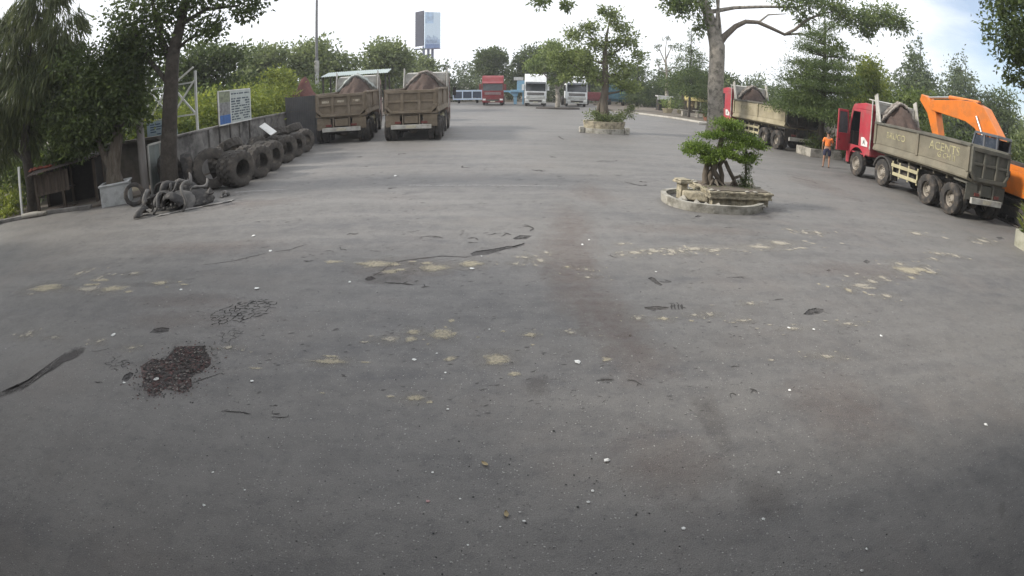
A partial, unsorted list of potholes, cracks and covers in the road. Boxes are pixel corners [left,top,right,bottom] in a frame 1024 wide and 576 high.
pothole [120,339,228,409]
crack [375,224,534,287]
crack [164,299,277,383]
